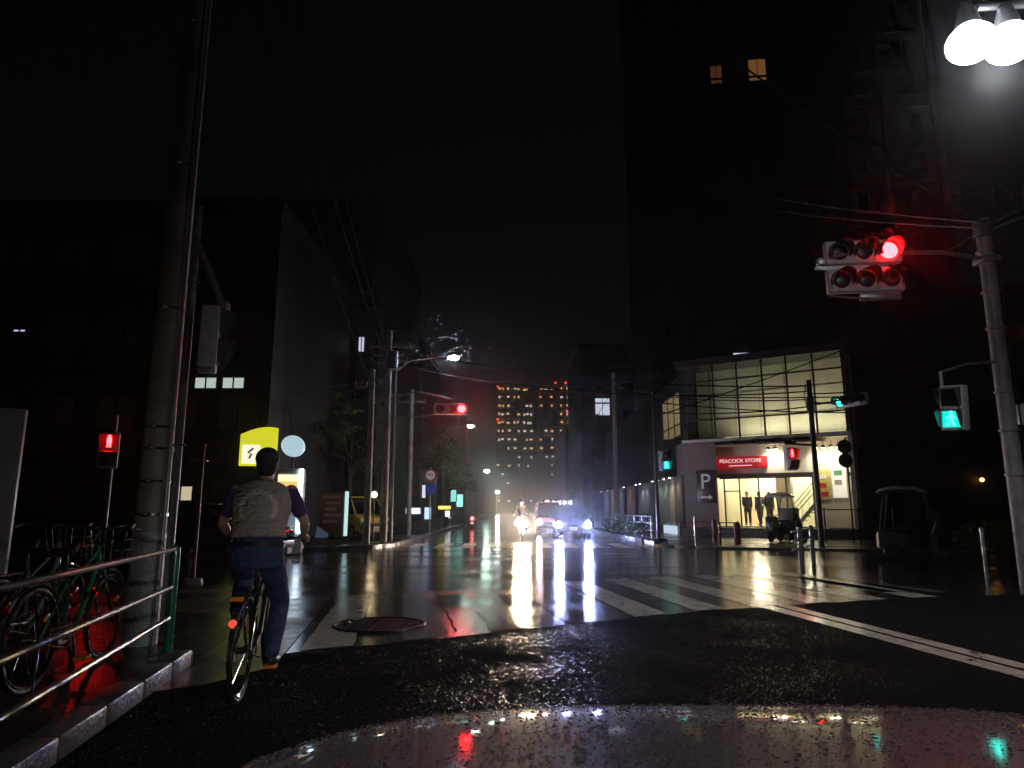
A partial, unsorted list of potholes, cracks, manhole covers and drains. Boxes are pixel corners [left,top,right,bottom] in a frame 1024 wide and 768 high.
manhole cover [332,616,426,633]
